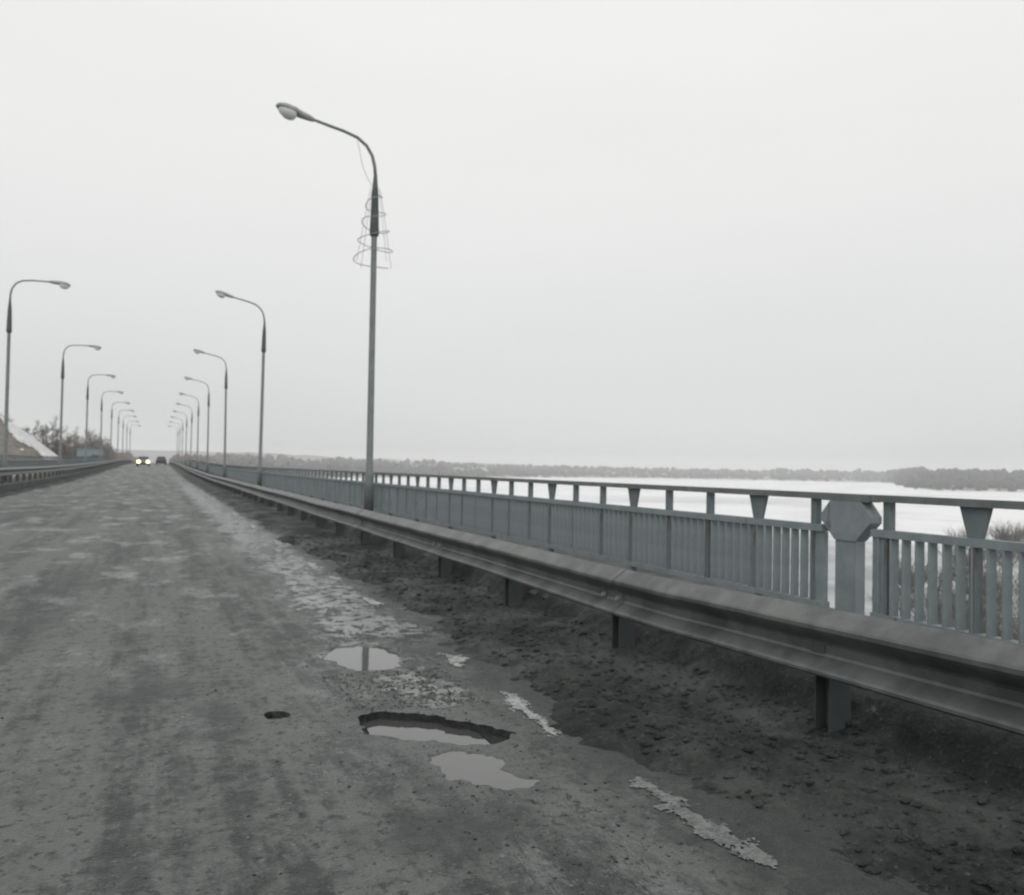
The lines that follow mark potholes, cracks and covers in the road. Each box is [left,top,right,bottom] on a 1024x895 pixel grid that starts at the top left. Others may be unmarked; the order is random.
pothole [358,711,515,742]
pothole [264,711,291,719]
pothole [426,748,546,788]
pothole [322,643,406,671]
